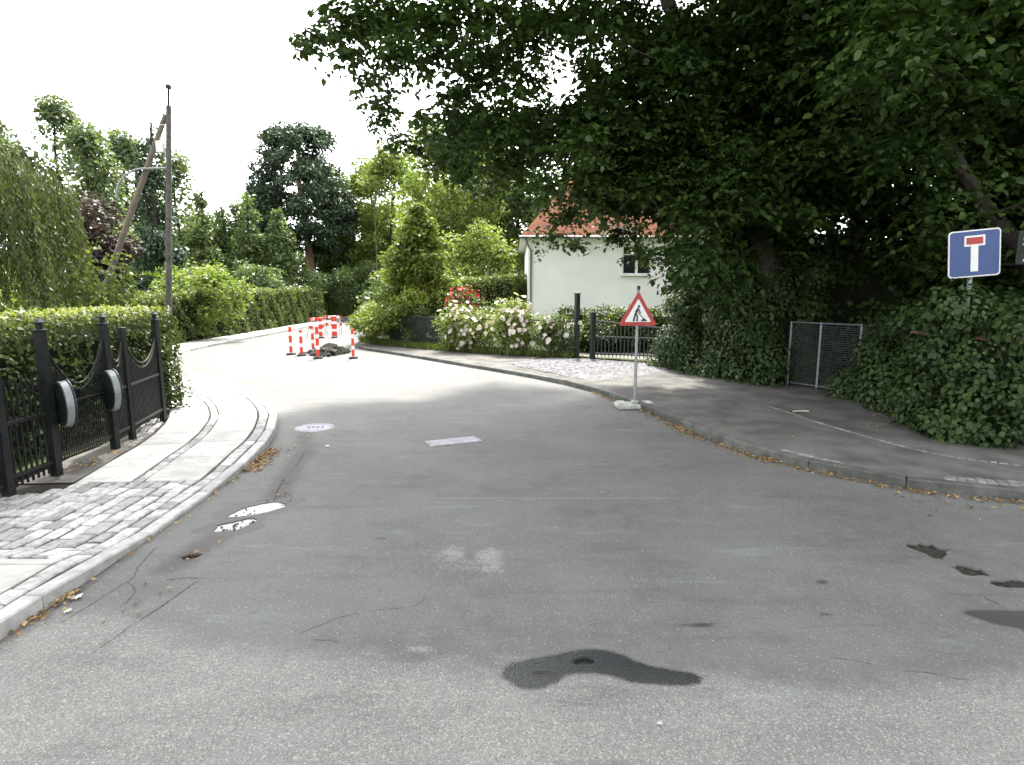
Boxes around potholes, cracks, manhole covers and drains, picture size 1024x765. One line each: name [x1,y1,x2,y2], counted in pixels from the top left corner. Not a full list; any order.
pothole [219,500,293,519]
crack [300,597,427,643]
pothole [563,651,606,672]
pothole [172,550,211,563]
pothole [897,539,960,563]
manhole cover [294,423,335,432]
crack [905,650,972,682]
pothole [205,516,264,535]
pothole [936,560,1000,581]
crack [831,657,872,665]
crack [62,548,203,653]
crack [273,453,305,501]
